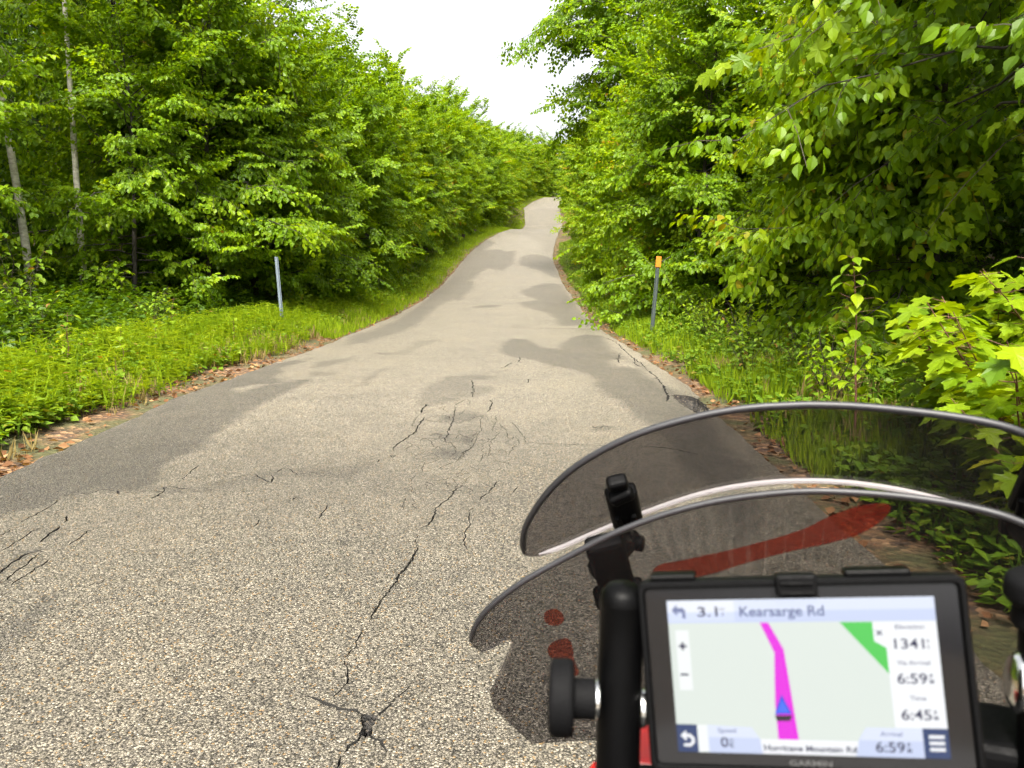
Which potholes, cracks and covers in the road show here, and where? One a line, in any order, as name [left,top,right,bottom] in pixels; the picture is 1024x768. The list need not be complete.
crack [607,338,670,401]
crack [236,381,531,768]
crack [0,466,198,585]
pothole [672,394,710,413]
pothole [361,713,378,738]
